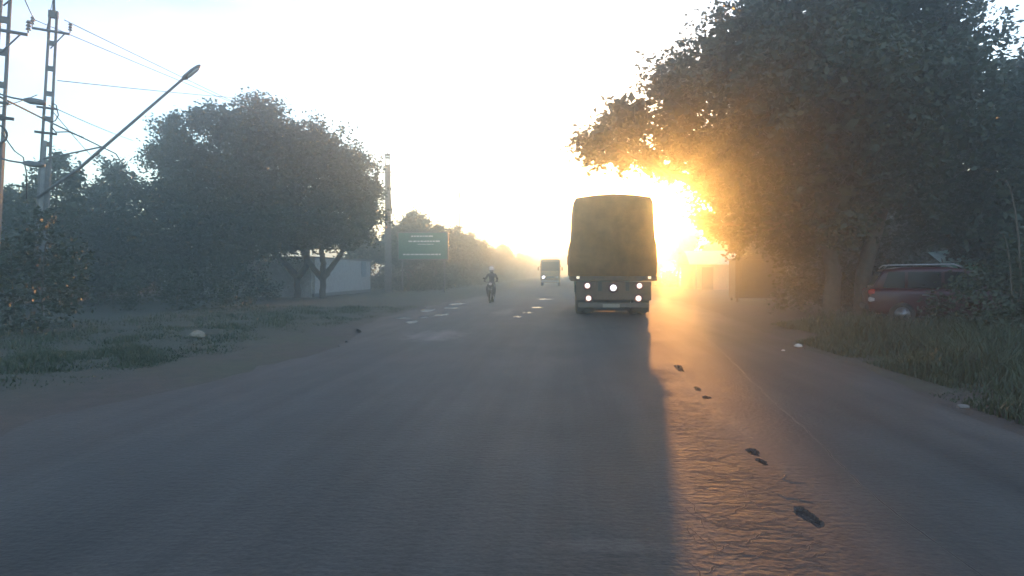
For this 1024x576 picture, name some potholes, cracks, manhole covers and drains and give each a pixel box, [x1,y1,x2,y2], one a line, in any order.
pothole [792,506,825,528]
crack [640,332,983,576]
